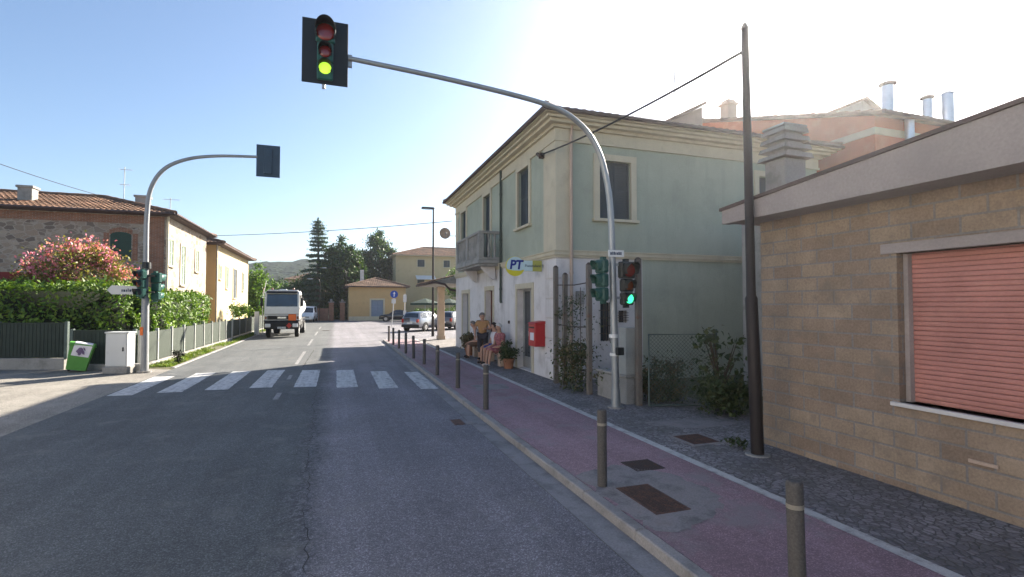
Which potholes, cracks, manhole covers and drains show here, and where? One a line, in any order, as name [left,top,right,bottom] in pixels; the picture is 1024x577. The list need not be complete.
drain grate [616,484,691,515]
manhole cover [621,459,665,471]
crack [277,392,332,577]
manhole cover [667,432,726,446]
